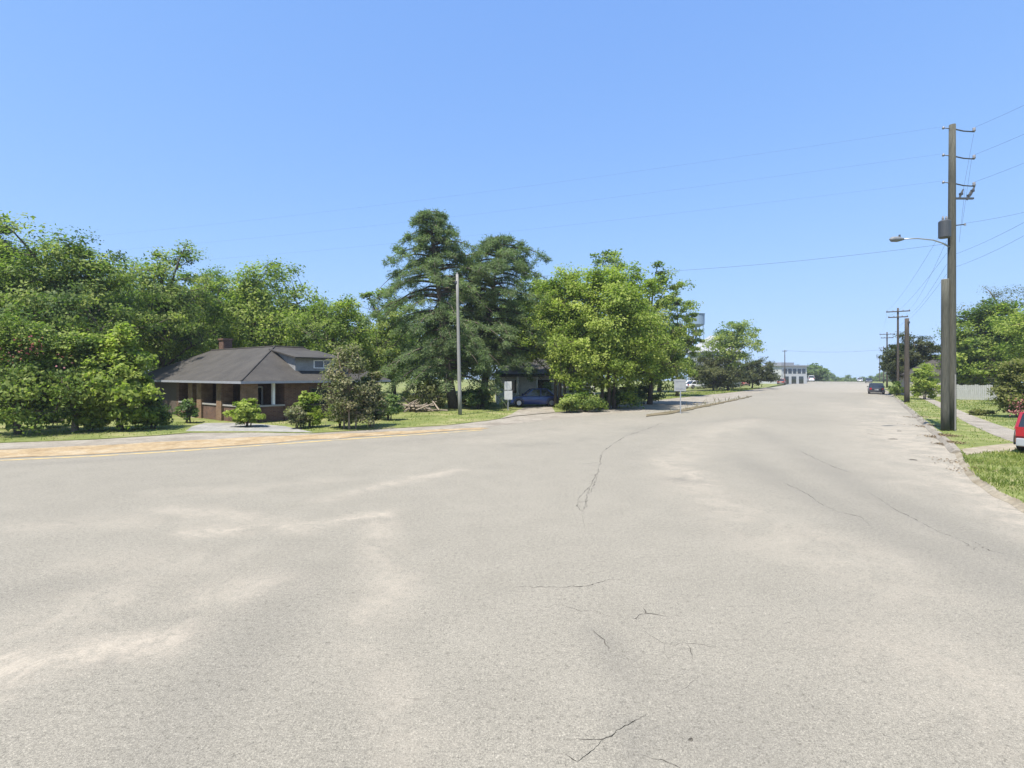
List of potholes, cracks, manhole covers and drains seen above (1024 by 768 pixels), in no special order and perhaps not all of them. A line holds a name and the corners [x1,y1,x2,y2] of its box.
crack [576,424,658,518]
crack [635,608,714,660]
crack [520,579,624,649]
crack [567,713,647,762]
